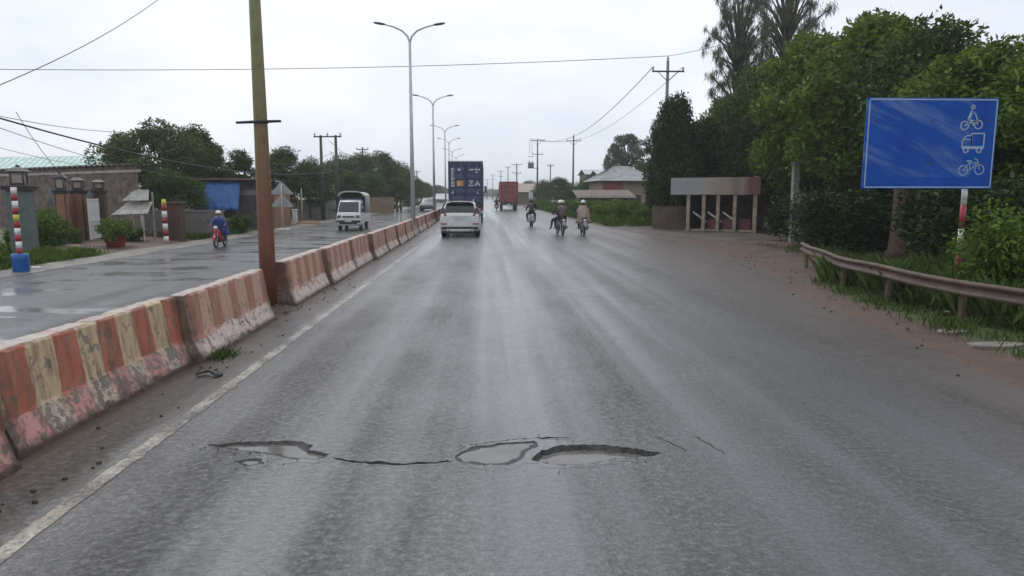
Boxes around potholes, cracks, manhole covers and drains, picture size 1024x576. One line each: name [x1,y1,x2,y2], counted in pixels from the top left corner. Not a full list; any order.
pothole [523,437,668,473]
pothole [219,452,273,472]
pothole [192,438,336,465]
crack [332,457,453,467]
crack [654,436,725,454]
pothole [444,435,548,473]
